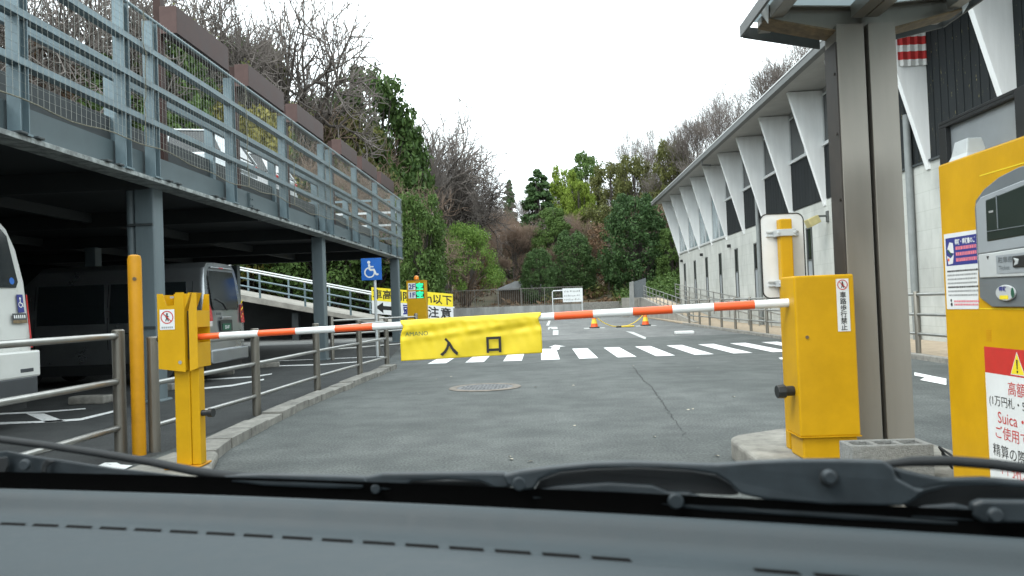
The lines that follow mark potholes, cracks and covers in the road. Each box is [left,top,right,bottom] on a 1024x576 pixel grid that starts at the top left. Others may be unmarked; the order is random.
crack [633,367,690,440]
manhole cover [449,383,521,391]
